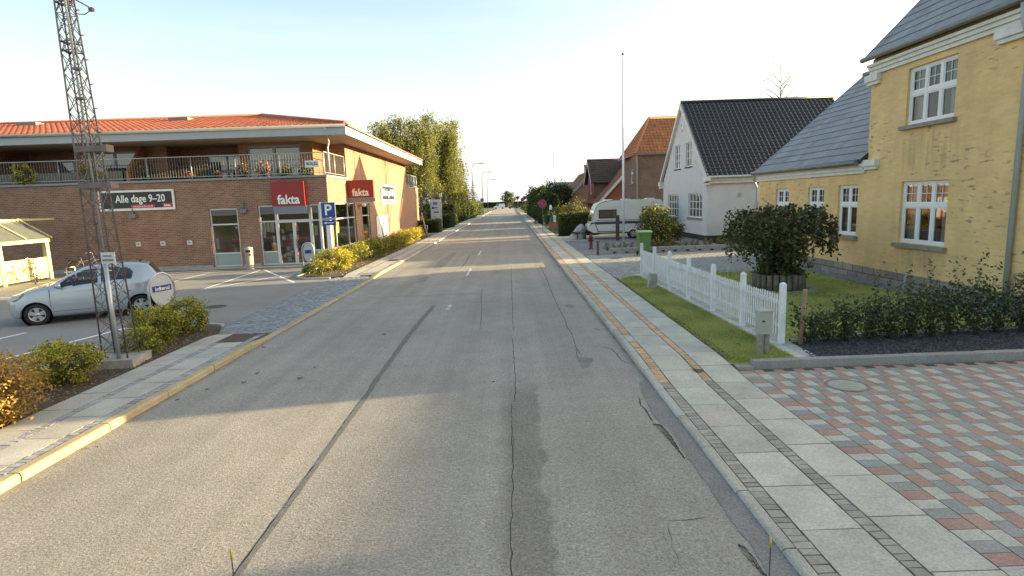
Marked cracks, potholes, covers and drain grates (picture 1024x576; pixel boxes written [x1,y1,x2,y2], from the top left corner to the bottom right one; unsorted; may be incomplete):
crack [541,254,599,357]
manhole cover [215,333,260,343]
manhole cover [824,379,870,392]
crack [667,517,706,563]
